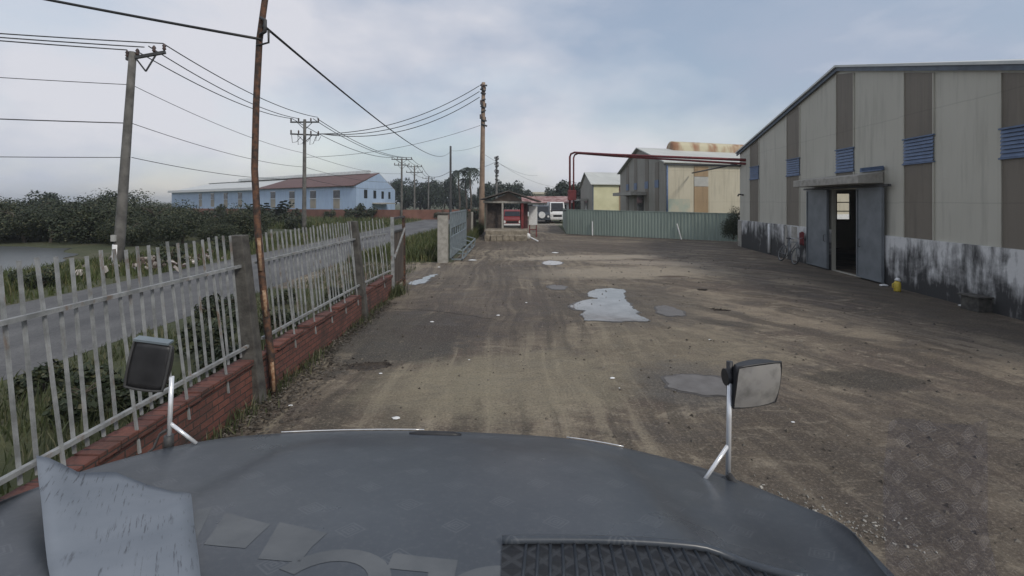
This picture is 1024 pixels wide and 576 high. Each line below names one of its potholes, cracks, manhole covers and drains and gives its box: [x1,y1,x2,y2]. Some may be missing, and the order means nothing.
pothole [340,360,394,371]
